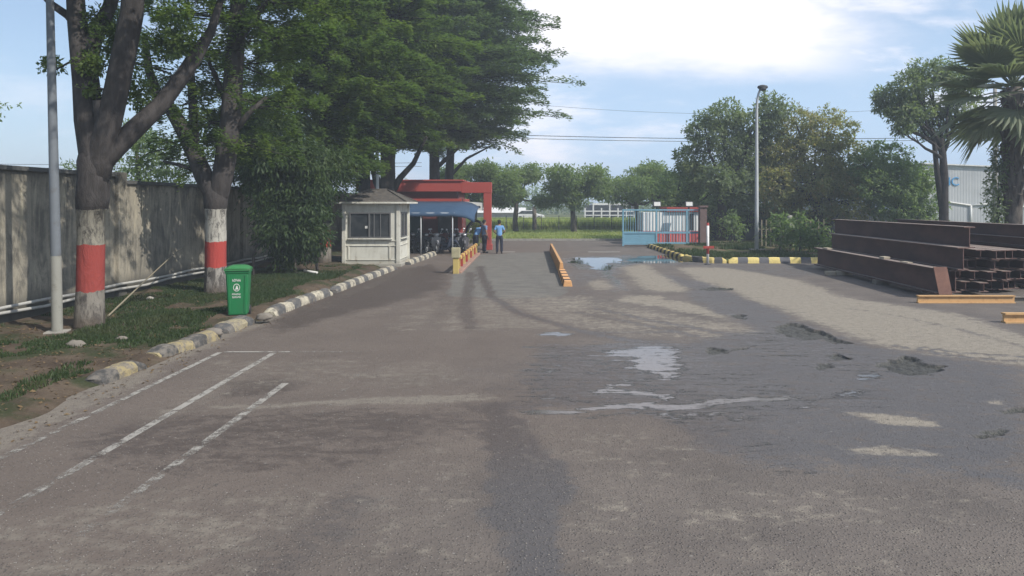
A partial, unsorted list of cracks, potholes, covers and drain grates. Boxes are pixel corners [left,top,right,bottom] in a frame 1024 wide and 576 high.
pothole [848,355,950,376]
pothole [770,322,854,344]
pothole [699,345,758,355]
pothole [965,428,1011,439]
